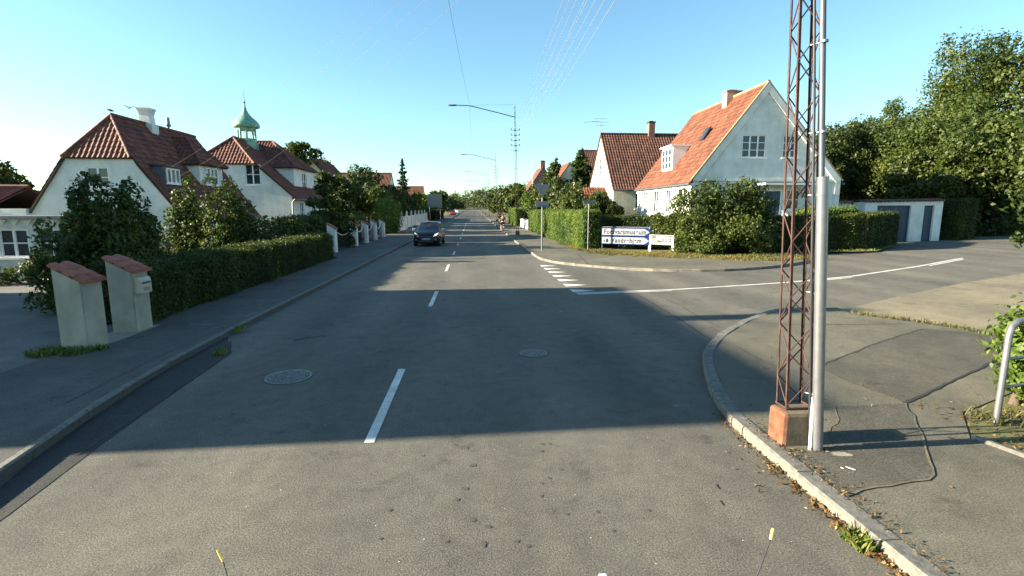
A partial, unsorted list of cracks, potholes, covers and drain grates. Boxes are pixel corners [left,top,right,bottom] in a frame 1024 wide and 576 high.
manhole cover [263,369,314,385]
manhole cover [519,349,548,358]
